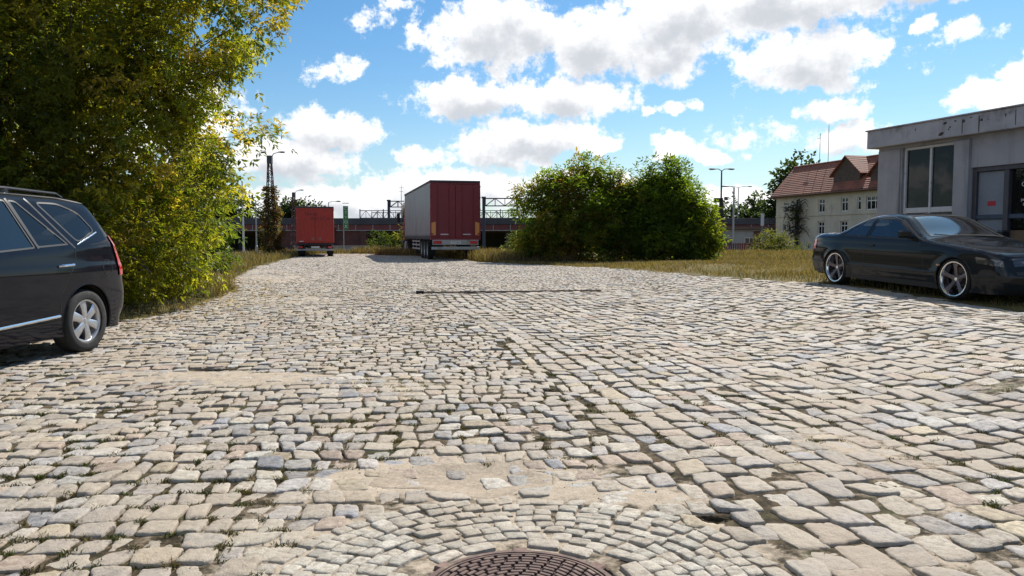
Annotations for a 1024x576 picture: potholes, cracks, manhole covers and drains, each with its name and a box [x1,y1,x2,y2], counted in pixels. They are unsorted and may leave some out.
manhole cover [430,548,611,576]
pothole [696,515,730,524]
